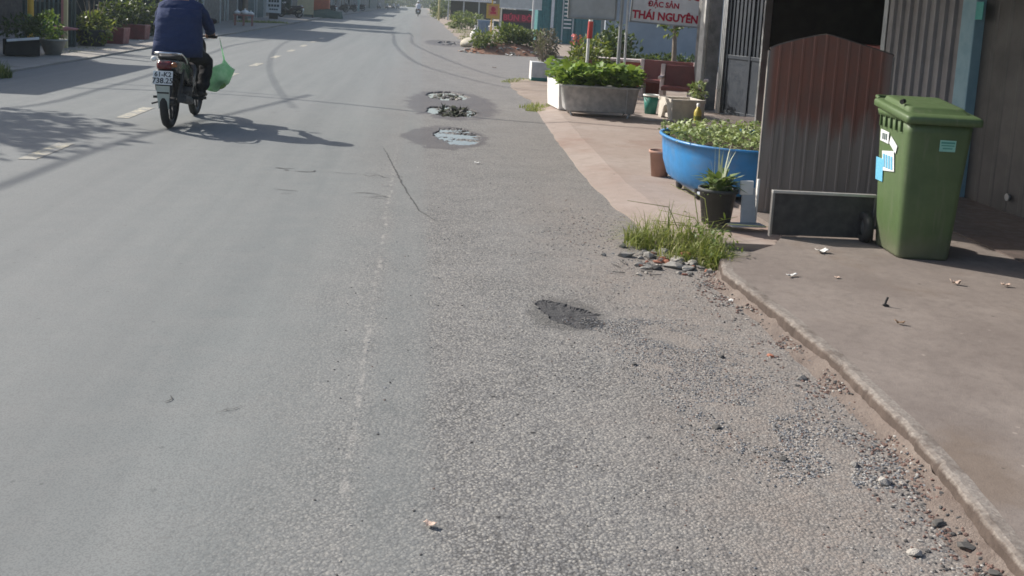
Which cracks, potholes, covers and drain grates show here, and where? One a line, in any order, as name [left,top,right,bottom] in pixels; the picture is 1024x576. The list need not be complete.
pothole [425,91,471,101]
pothole [432,128,482,145]
crack [337,149,440,221]
pothole [425,105,478,117]
